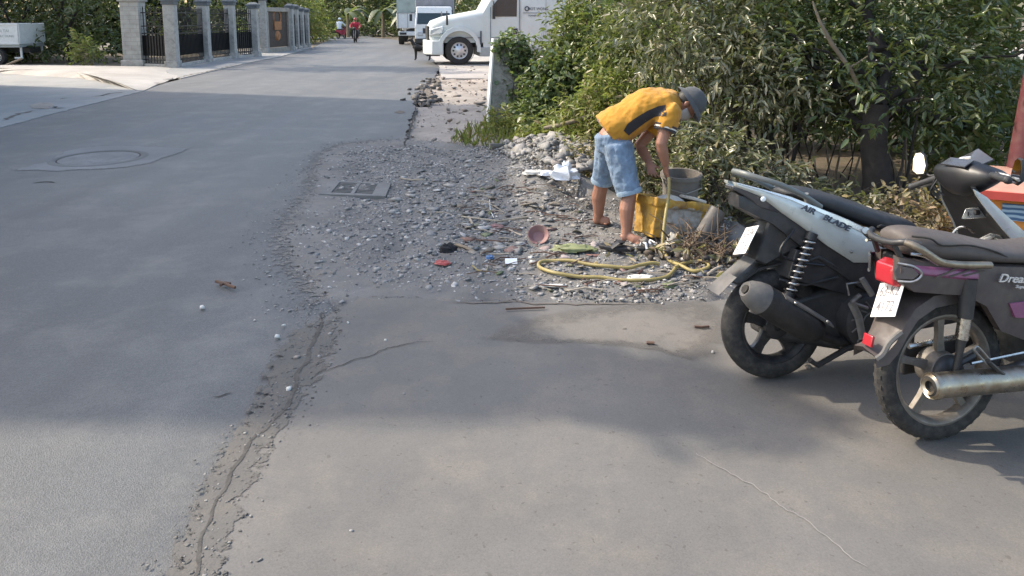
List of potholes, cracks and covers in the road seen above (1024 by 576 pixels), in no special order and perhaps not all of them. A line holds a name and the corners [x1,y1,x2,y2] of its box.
manhole cover [11,145,189,171]
crack [194,311,427,576]
